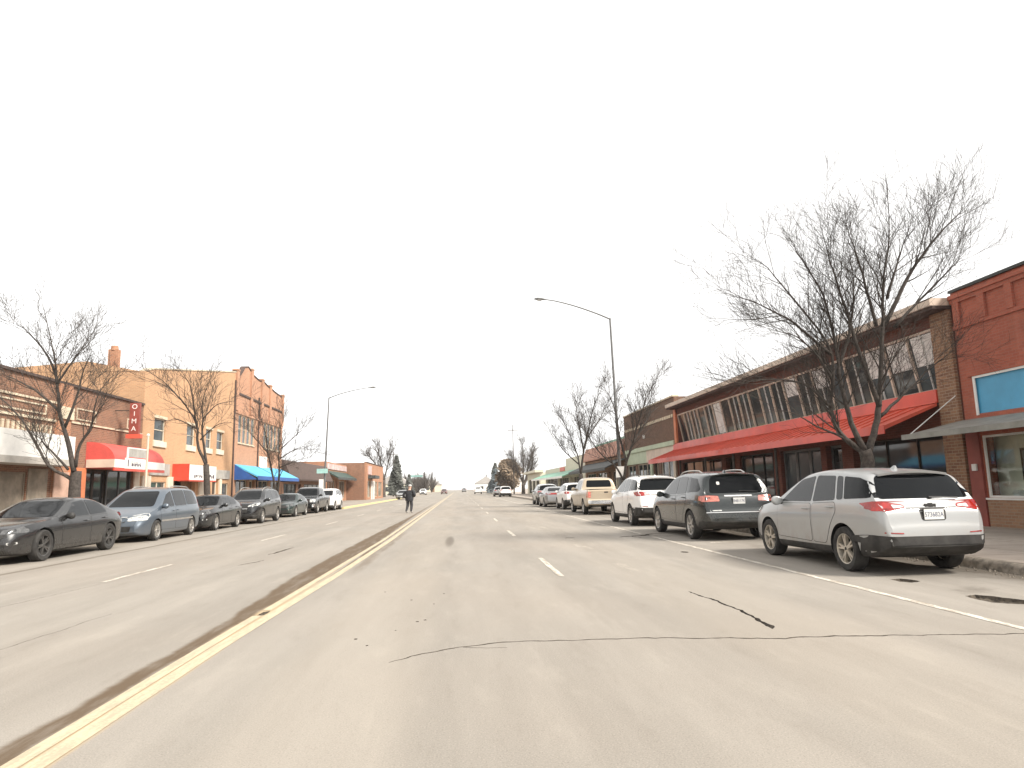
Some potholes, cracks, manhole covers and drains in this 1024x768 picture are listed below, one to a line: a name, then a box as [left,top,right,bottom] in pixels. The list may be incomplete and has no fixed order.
pothole [967,595,1024,604]
crack [389,591,1024,663]
